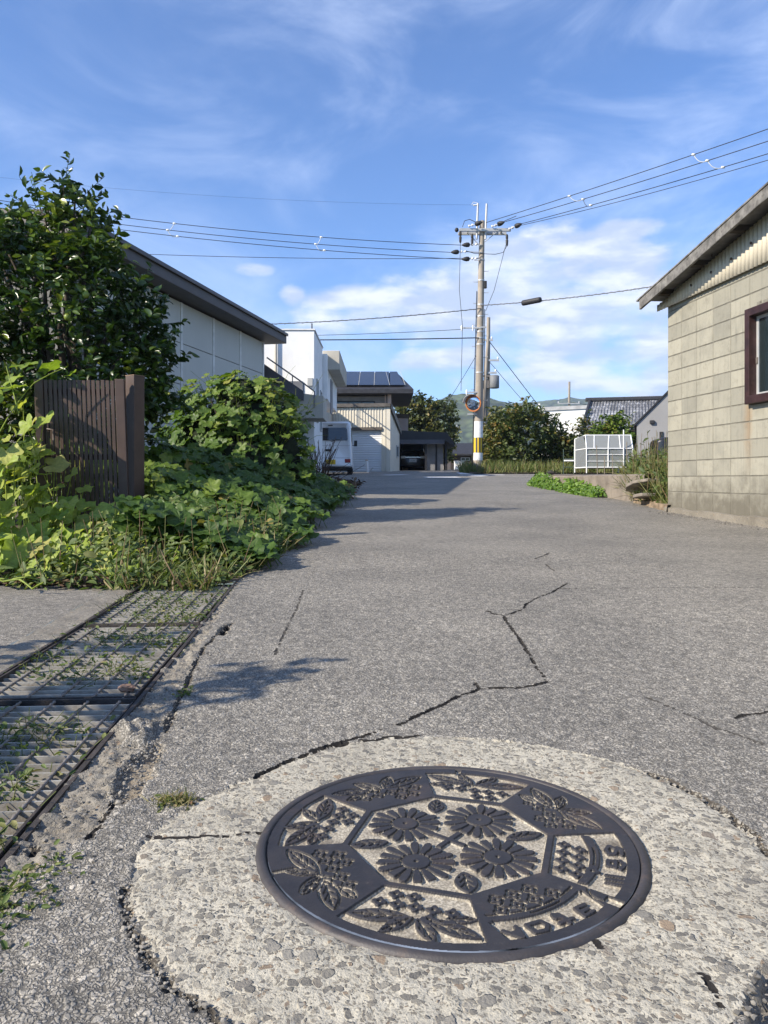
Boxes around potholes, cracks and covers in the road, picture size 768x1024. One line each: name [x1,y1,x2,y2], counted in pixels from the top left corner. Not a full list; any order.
drain grate [0,698,136,860]
crack [83,803,117,840]
crack [253,553,568,779]
drain grate [0,623,200,700]
crack [145,831,262,840]
manhole cover [255,766,652,964]
crack [163,623,234,733]
drain grate [85,584,232,625]
crack [646,697,768,745]
